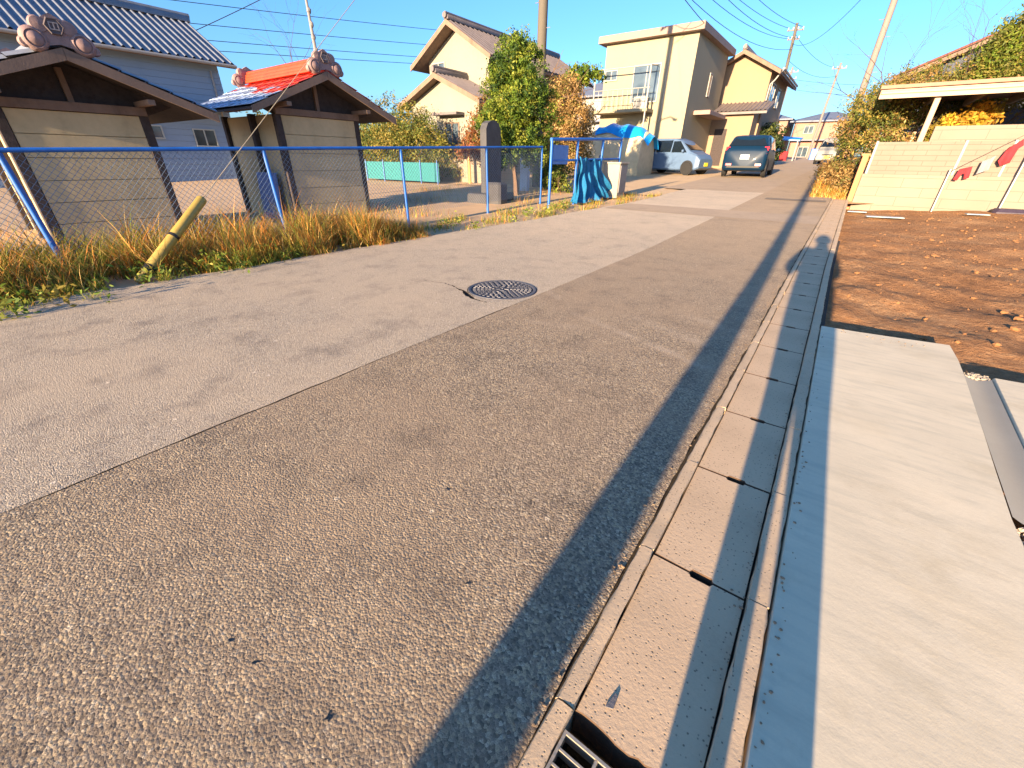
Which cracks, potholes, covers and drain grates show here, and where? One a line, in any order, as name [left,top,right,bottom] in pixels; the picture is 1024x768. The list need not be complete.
drain grate [545,729,611,768]
manhole cover [468,280,536,300]
